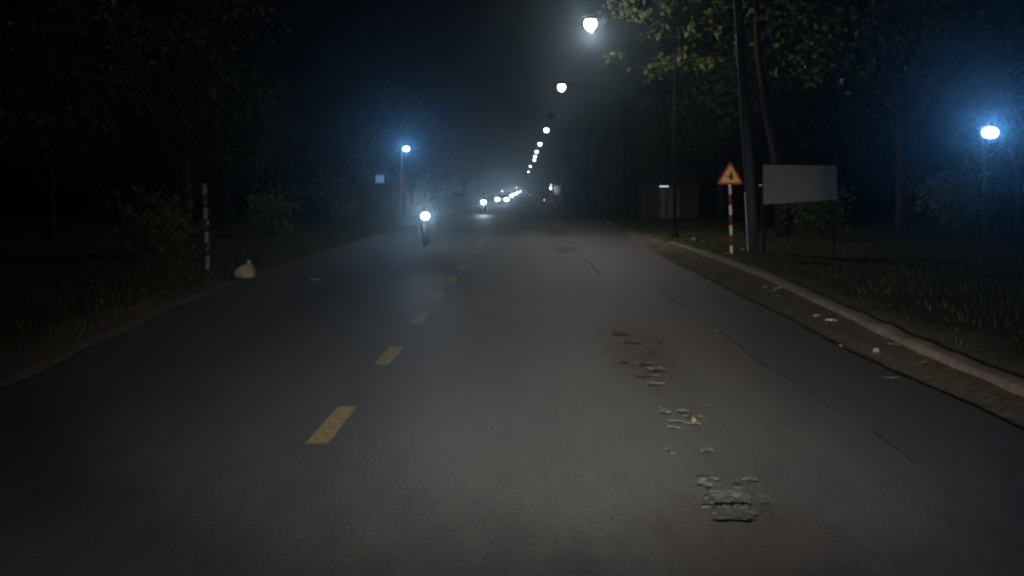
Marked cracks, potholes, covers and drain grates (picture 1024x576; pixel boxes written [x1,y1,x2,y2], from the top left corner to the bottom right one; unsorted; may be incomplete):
pothole [753,494,773,505]
pothole [705,490,759,523]
crack [657,285,916,465]
